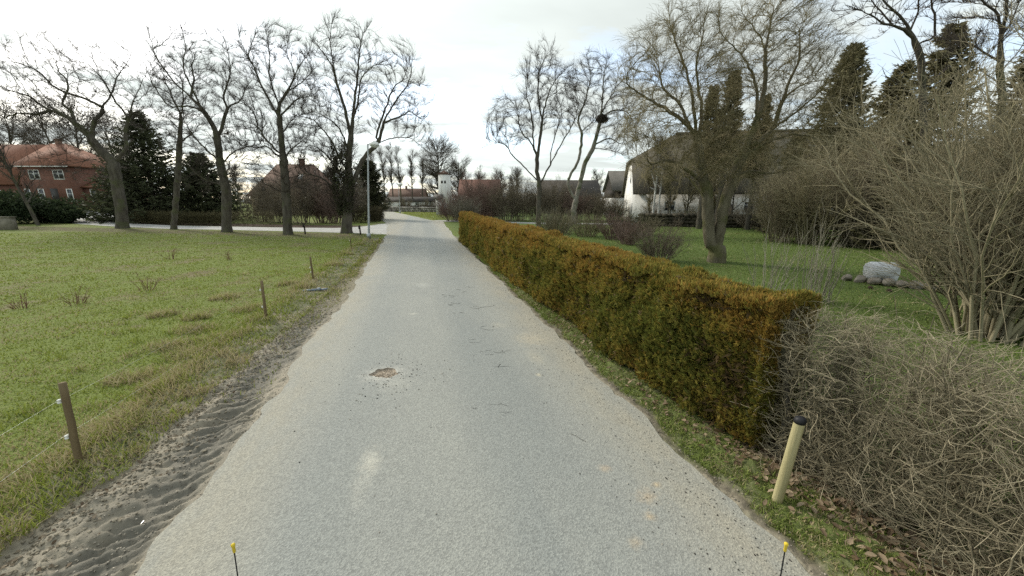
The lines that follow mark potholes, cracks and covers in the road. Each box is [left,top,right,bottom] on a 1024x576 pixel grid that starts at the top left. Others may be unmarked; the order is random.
pothole [369,368,398,378]
